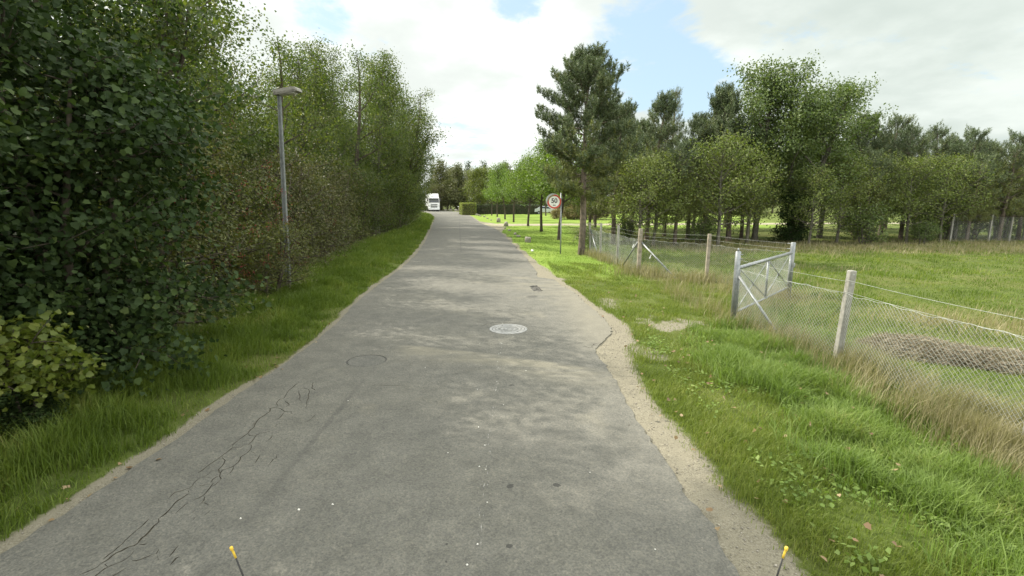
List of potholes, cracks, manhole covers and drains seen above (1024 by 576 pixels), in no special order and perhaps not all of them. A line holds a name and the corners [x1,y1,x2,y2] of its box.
manhole cover [489,324,527,334]
manhole cover [346,355,387,367]
crack [80,382,316,576]
